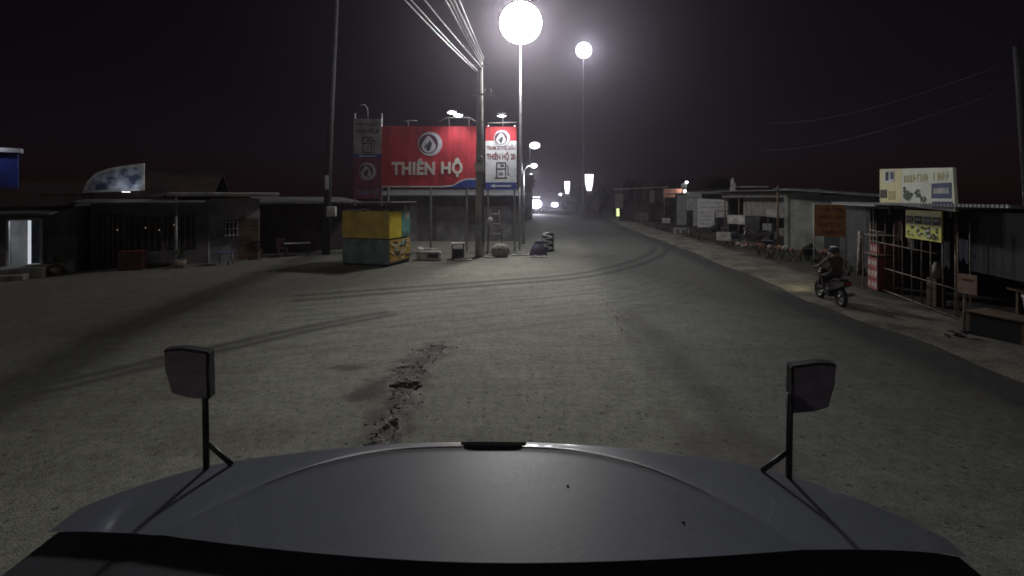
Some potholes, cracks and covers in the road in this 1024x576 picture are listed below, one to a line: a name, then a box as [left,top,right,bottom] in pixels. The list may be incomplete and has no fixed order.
pothole [388,363,429,379]
pothole [412,344,449,359]
pothole [389,378,423,397]
crack [599,293,634,333]
pothole [362,418,399,446]
